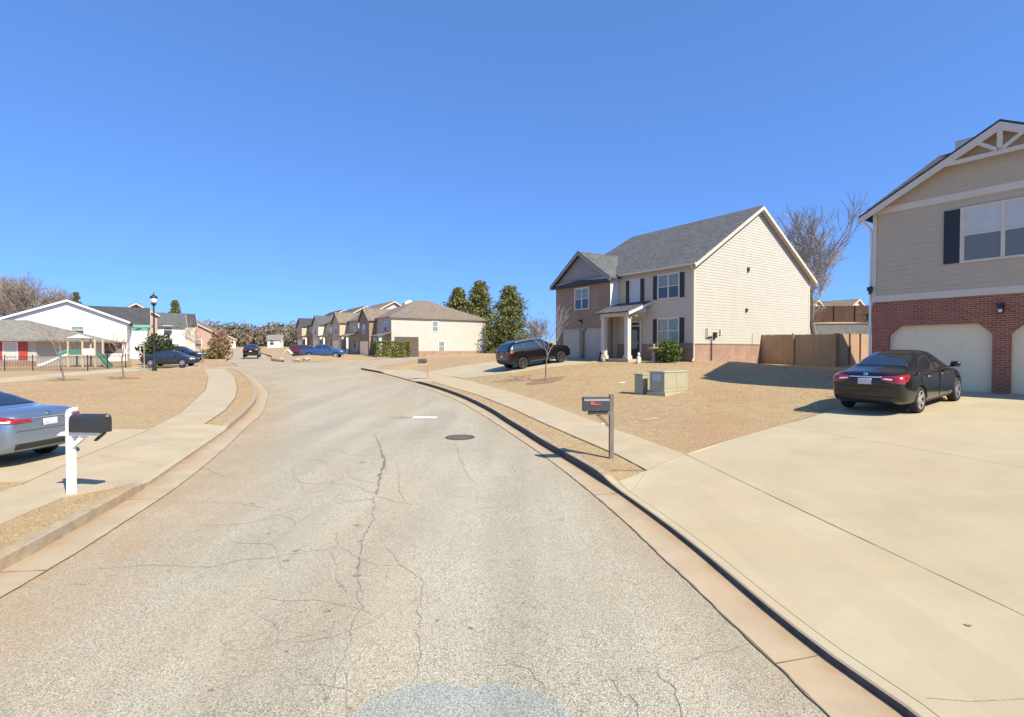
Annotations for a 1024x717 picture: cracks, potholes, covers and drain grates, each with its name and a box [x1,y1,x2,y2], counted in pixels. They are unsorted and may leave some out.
crack [574,643,748,717]
crack [96,436,425,717]
